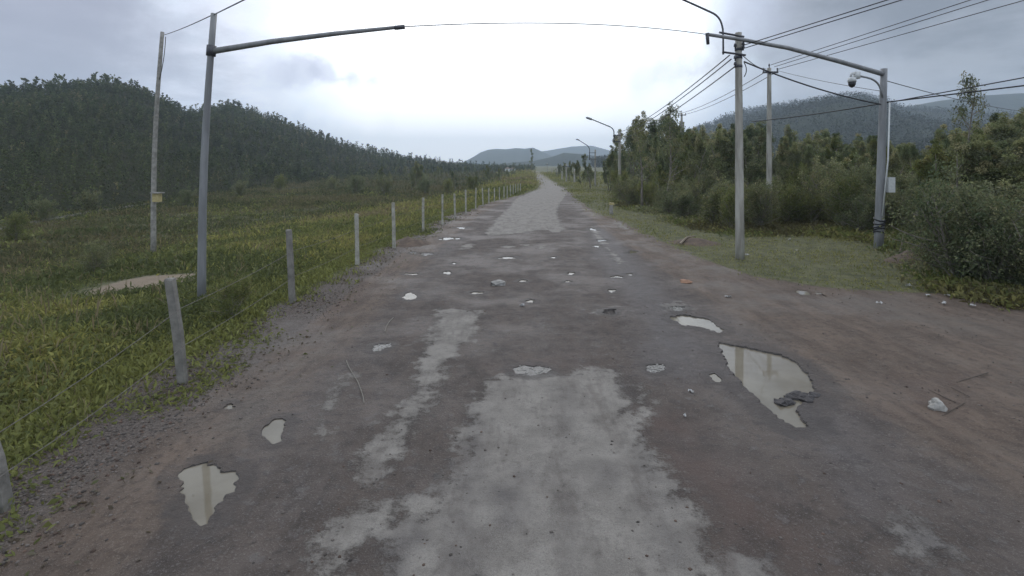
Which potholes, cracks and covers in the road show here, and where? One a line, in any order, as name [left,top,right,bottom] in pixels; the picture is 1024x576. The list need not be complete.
pothole [397,291,422,301]
pothole [365,341,399,354]
pothole [163,455,252,535]
pothole [597,308,621,317]
pothole [710,340,827,433]
pothole [638,361,673,376]
pothole [505,362,559,379]
pothole [250,414,296,449]
pothole [664,313,731,335]
